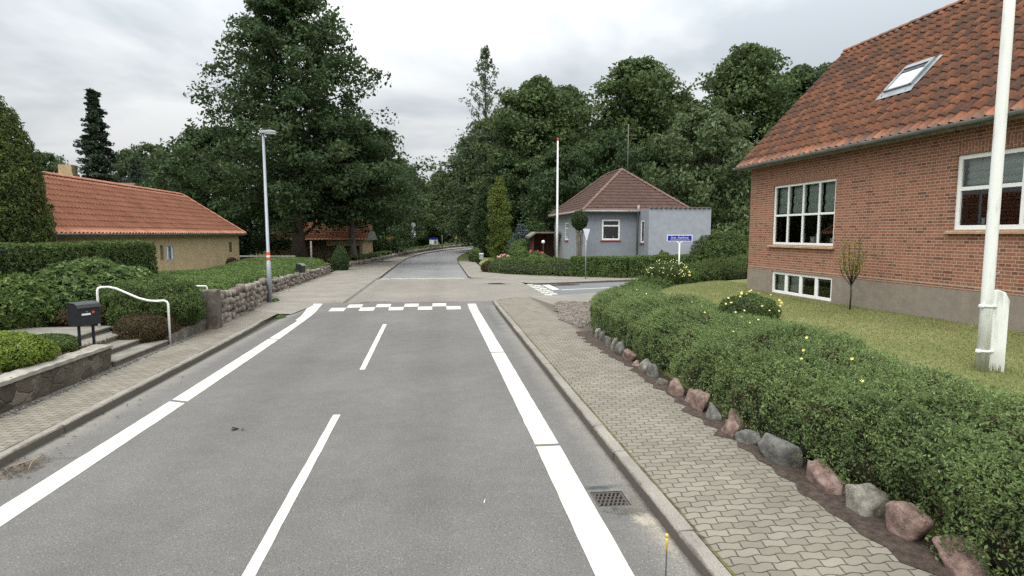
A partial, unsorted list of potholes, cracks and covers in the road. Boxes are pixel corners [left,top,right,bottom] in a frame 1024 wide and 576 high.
drain grate [590,491,630,507]
